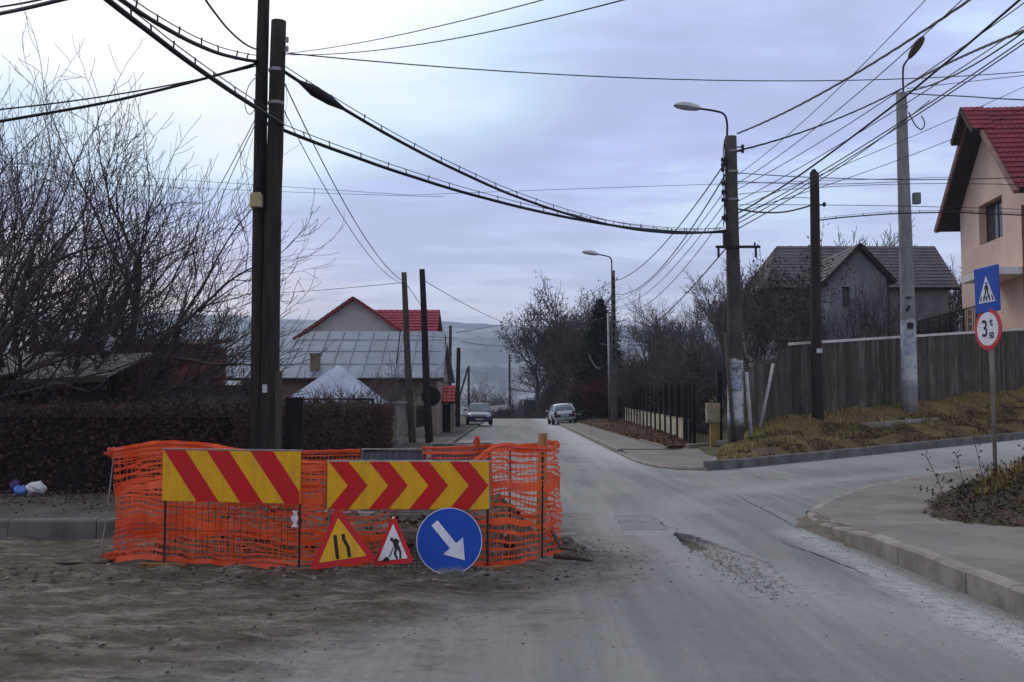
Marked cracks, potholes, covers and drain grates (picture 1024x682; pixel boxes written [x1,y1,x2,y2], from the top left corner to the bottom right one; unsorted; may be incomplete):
pothole [673,532,793,603]
crack [783,542,866,575]
